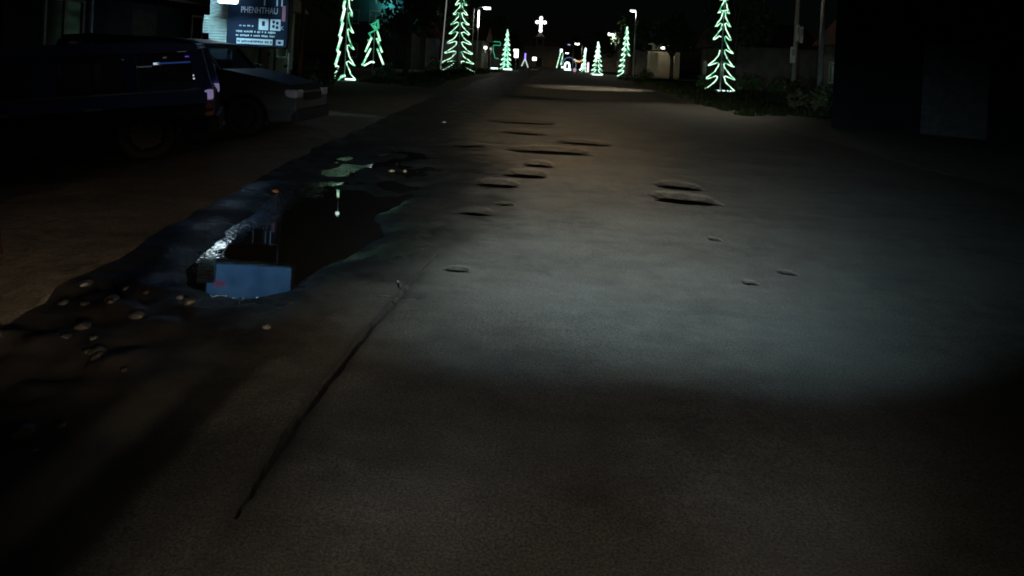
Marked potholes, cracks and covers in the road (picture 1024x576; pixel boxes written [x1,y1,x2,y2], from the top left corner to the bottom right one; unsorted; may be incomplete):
pothole [456,205,495,216]
pothole [646,190,723,206]
pothole [501,167,551,179]
pothole [472,177,523,188]
pothole [501,144,597,156]
pothole [651,179,705,191]
